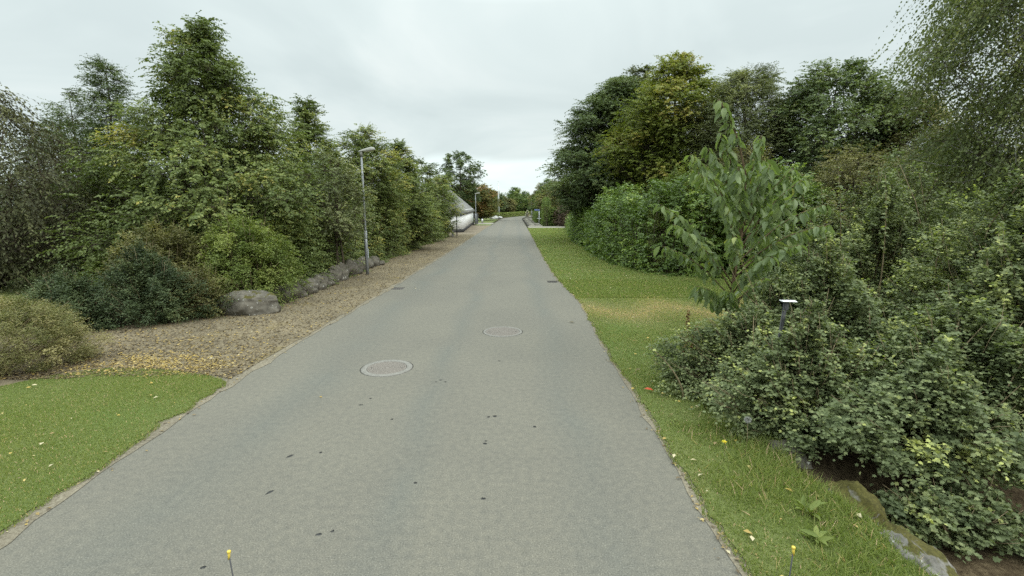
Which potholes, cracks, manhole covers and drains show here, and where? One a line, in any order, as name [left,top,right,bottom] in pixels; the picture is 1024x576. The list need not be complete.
manhole cover [483,327,523,337]
manhole cover [360,360,414,377]
